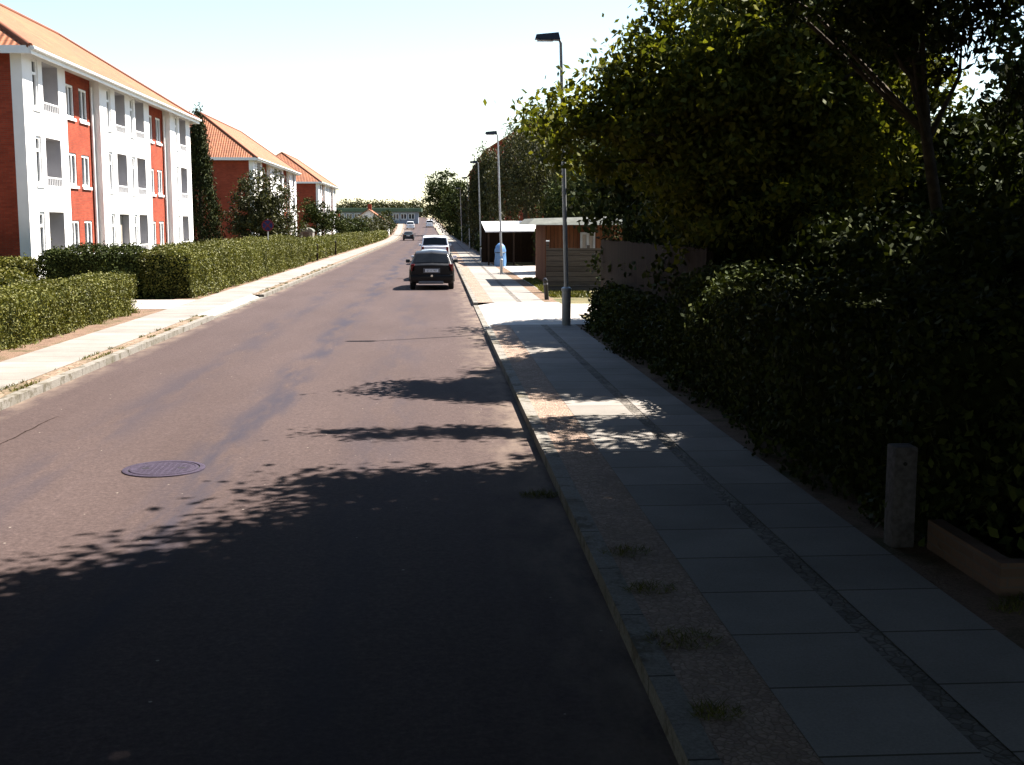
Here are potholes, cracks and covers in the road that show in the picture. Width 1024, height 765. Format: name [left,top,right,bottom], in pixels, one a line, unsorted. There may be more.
manhole cover [122,460,205,478]
